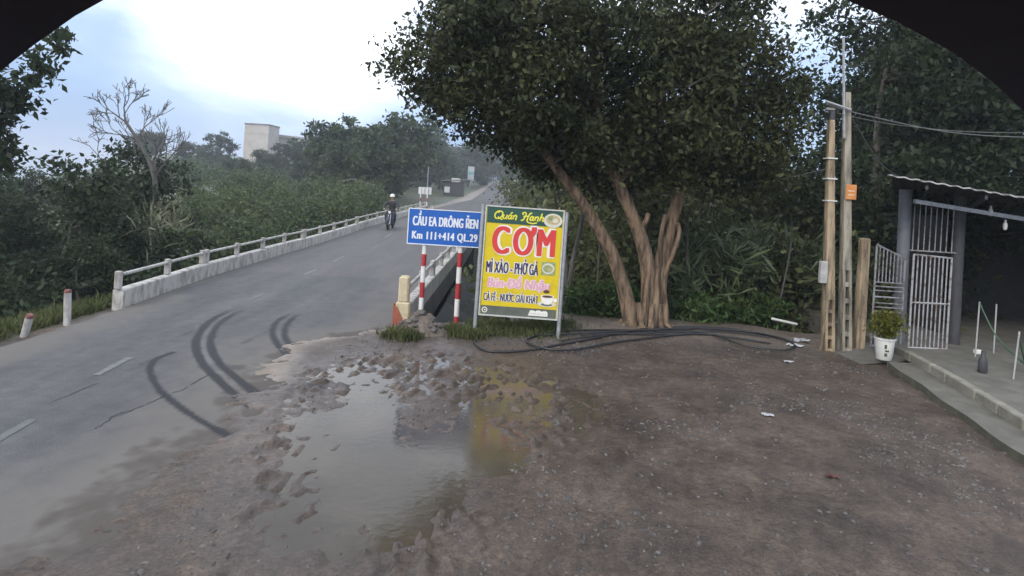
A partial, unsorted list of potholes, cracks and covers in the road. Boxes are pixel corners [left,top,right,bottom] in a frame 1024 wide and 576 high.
crack [95,372,212,429]
